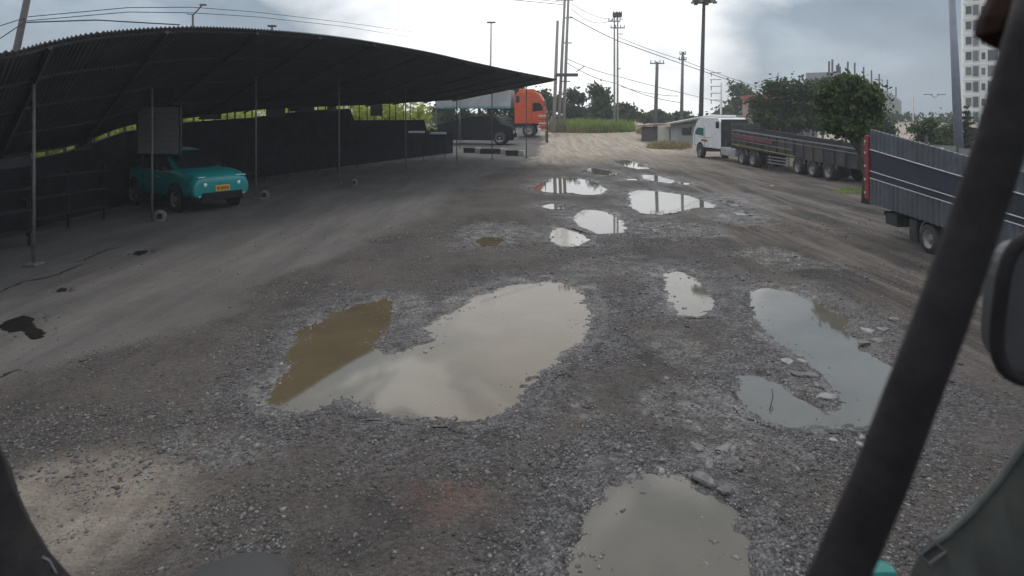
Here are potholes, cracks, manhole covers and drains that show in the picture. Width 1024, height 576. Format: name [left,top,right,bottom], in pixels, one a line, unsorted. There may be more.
pothole [635,173,680,184]
pothole [538,224,601,249]
pothole [645,266,733,319]
pothole [576,167,625,176]
pothole [717,282,895,436]
pothole [238,275,611,434]
pothole [468,234,511,247]
pothole [564,207,638,235]
pothole [611,159,656,169]
pothole [522,450,788,576]
pothole [620,188,726,215]
